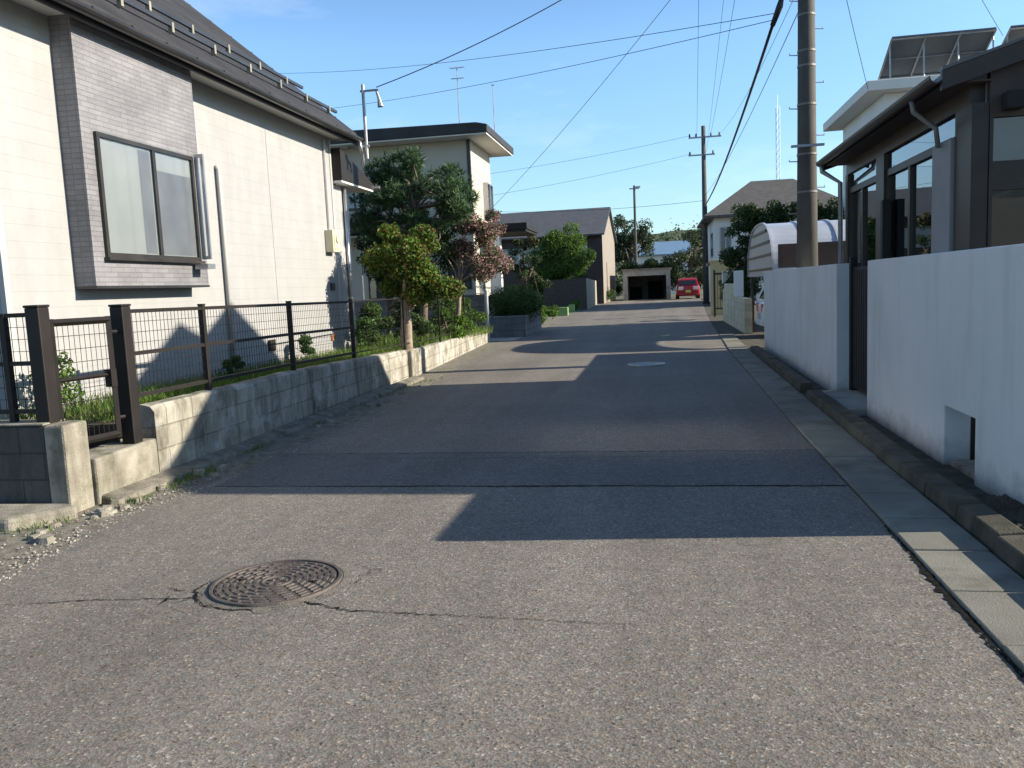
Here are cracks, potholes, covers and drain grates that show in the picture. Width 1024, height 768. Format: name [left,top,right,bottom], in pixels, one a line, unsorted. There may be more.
crack [0,582,276,611]
manhole cover [196,557,354,614]
crack [304,601,634,625]
